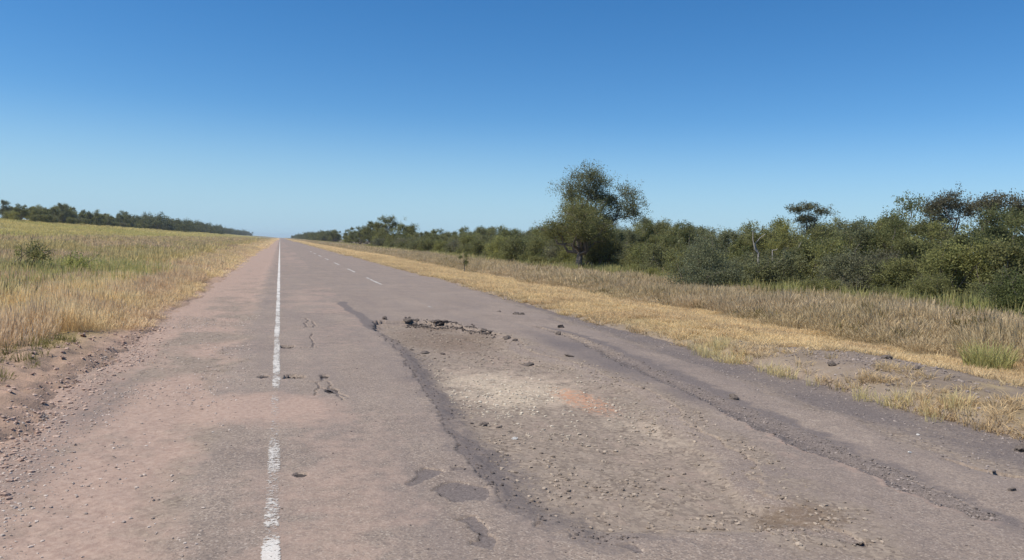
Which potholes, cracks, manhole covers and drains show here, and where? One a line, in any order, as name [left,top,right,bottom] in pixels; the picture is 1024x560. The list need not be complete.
crack [315,378,346,400]
